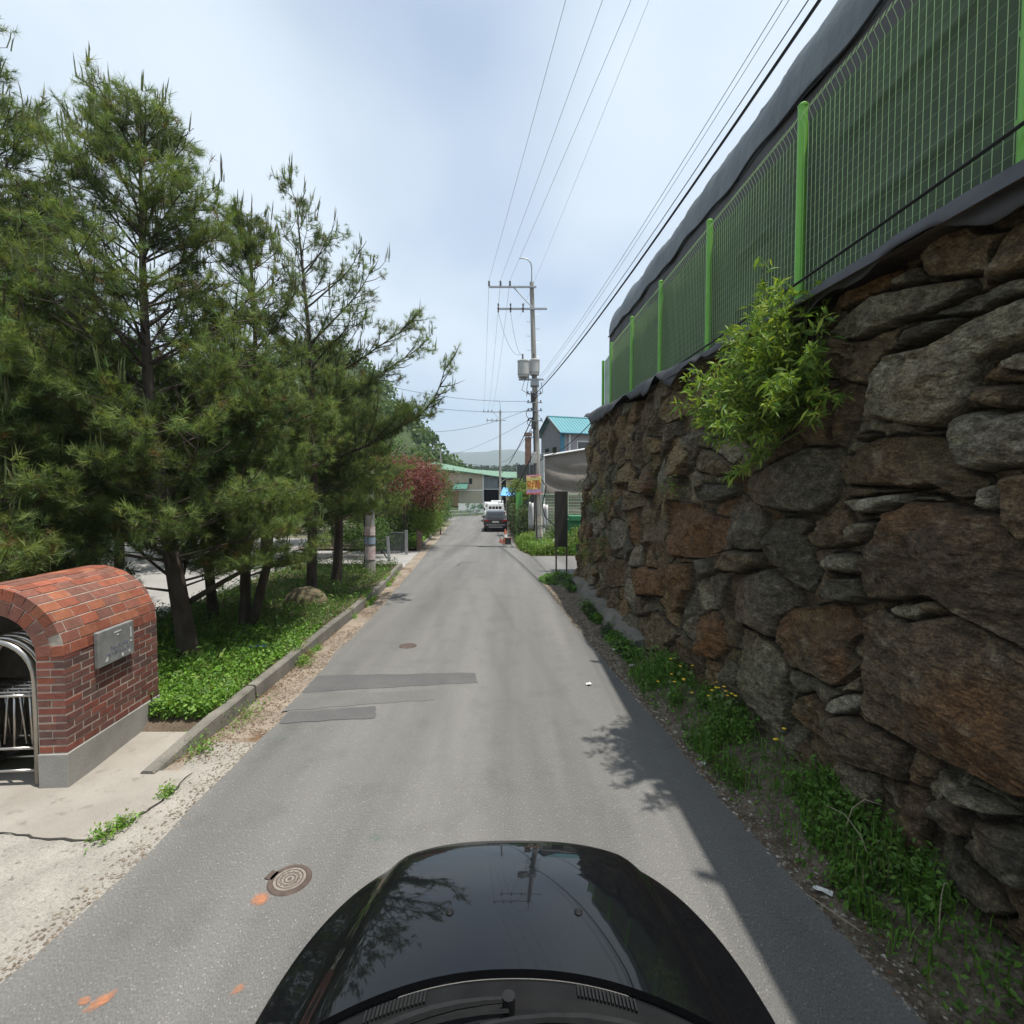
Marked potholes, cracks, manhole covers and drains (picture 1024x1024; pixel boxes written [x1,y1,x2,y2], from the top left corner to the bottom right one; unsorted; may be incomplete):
manhole cover [264,864,312,897]
